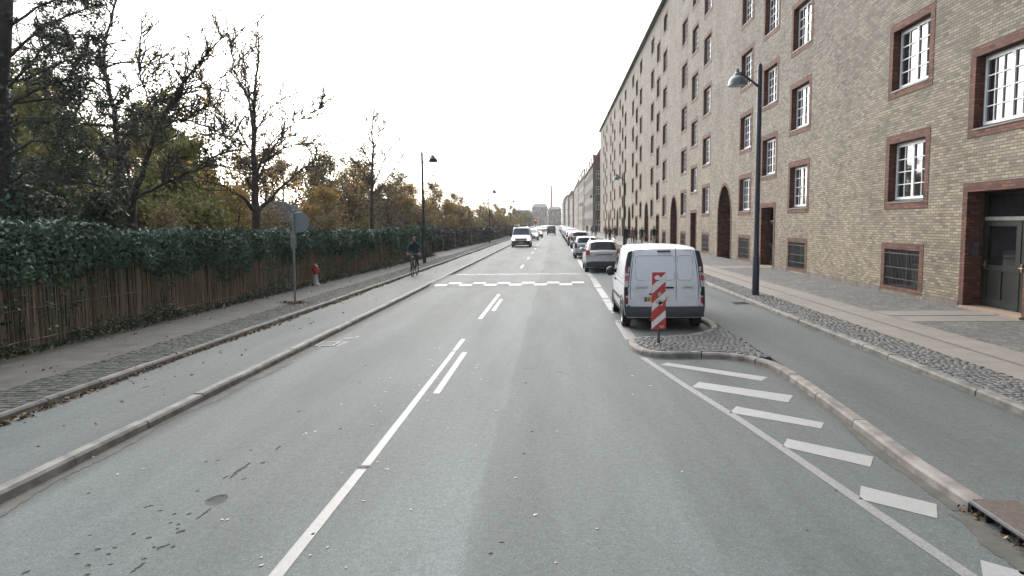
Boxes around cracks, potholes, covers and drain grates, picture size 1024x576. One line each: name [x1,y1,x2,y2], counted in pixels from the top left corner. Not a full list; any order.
pothole [205,494,228,506]
drain grate [968,500,1024,546]
crack [216,446,281,480]
